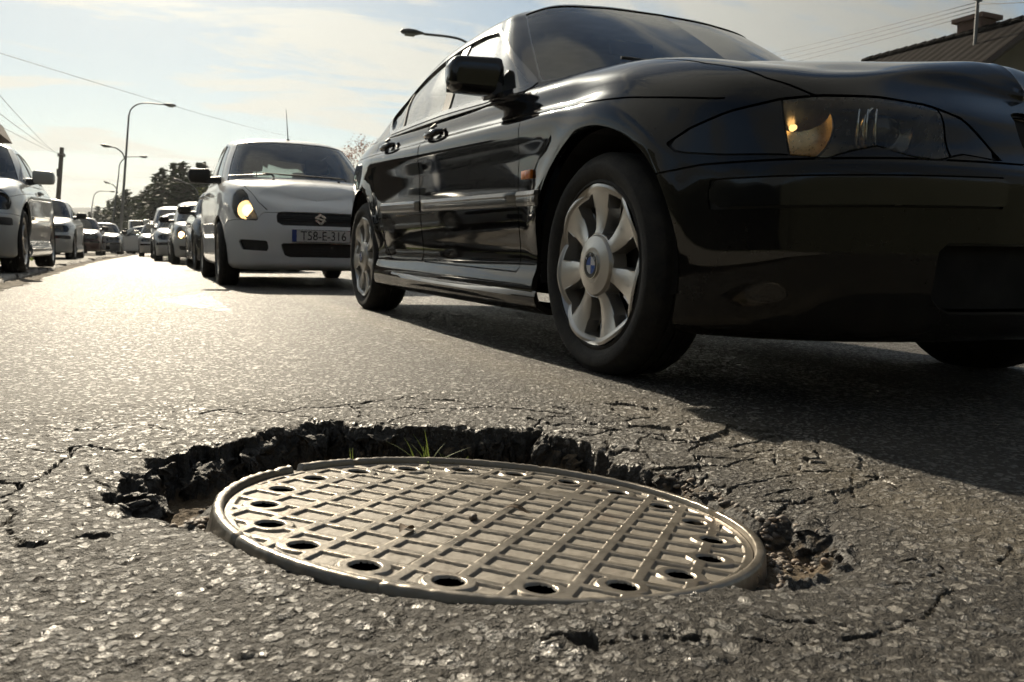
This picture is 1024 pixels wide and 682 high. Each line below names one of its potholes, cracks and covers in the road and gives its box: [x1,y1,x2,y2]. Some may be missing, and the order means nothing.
crack [204,399,902,516]
crack [0,450,141,498]
manhole cover [205,457,767,606]
